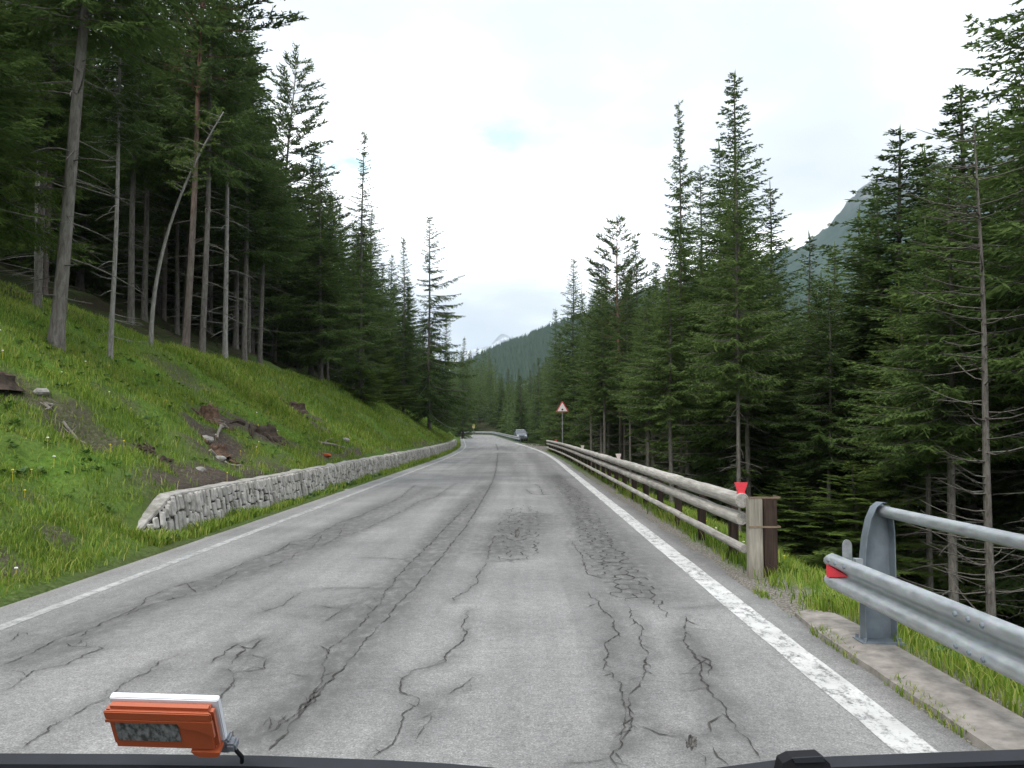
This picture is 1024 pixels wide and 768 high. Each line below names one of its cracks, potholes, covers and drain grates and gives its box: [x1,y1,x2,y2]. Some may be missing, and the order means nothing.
crack [232,503,470,736]
crack [553,474,760,767]
crack [6,485,450,690]
crack [25,637,269,746]
crack [453,484,546,600]
crack [374,614,473,755]
